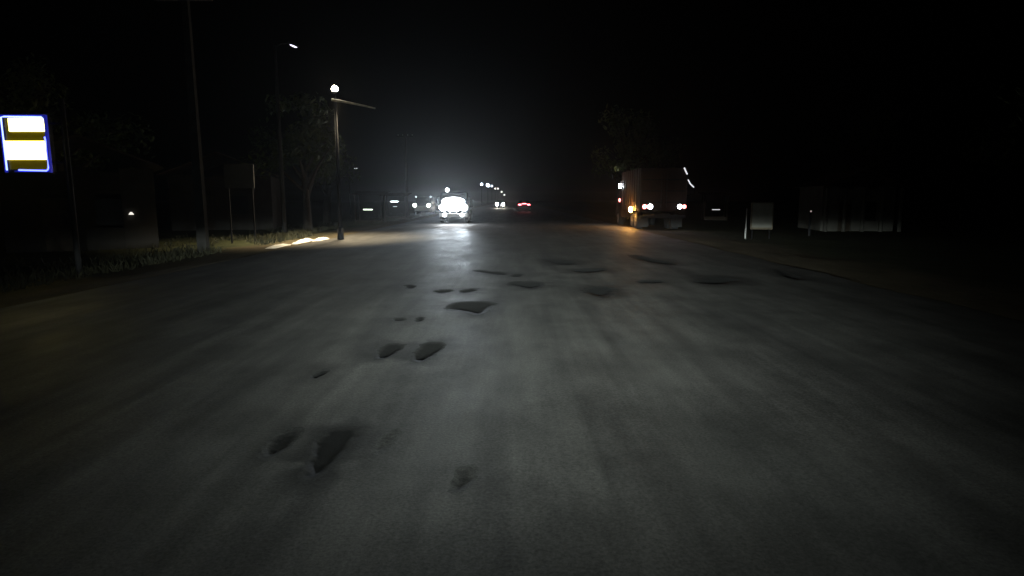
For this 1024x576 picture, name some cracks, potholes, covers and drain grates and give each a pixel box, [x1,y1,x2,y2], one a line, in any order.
pothole [773,269,806,280]
pothole [443,301,498,316]
pothole [410,342,447,363]
pothole [506,281,545,289]
pothole [628,255,677,265]
pothole [374,343,407,360]
pothole [297,426,362,483]
pothole [580,286,618,298]
pothole [694,277,742,285]
pothole [447,464,482,495]
pothole [255,427,305,461]
pothole [310,369,330,379]
